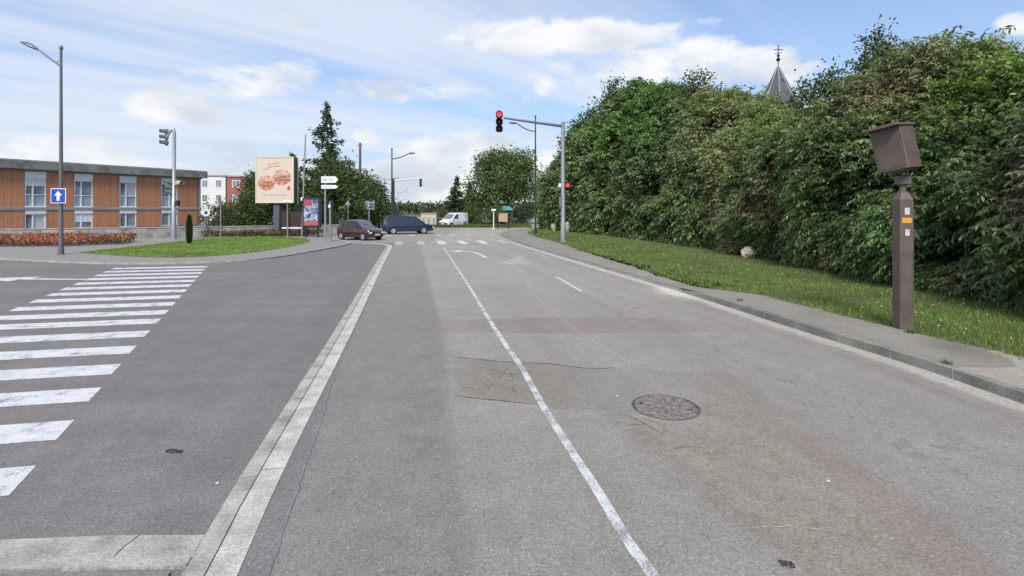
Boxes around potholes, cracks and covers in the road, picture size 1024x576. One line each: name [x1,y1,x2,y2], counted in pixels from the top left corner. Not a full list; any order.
manhole cover [631,394,701,421]
crack [269,385,332,575]
pothole [777,560,795,568]
crack [454,280,696,404]
